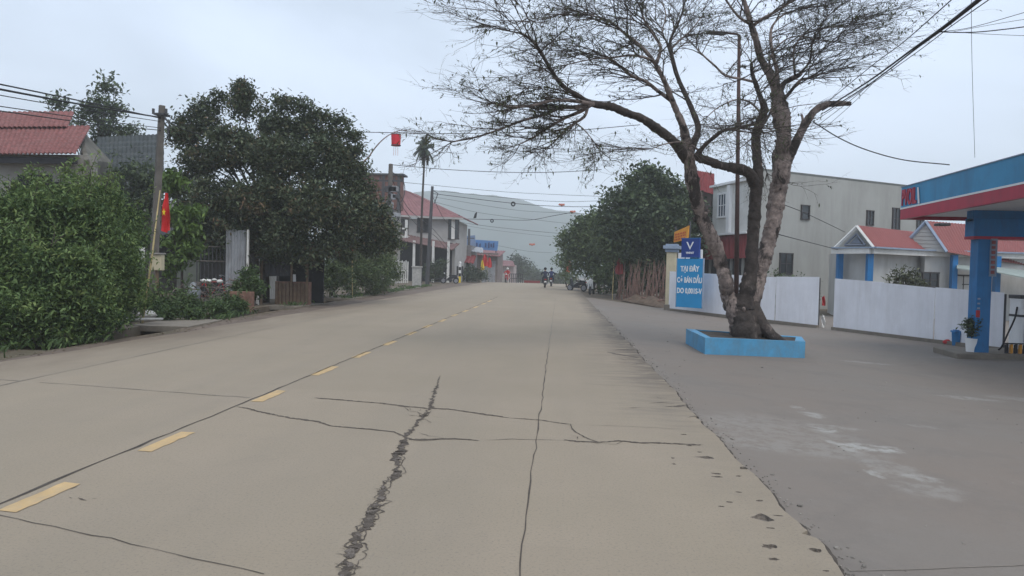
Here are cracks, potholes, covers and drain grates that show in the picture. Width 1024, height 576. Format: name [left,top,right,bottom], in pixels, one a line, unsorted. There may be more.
crack [237,377,703,576]
